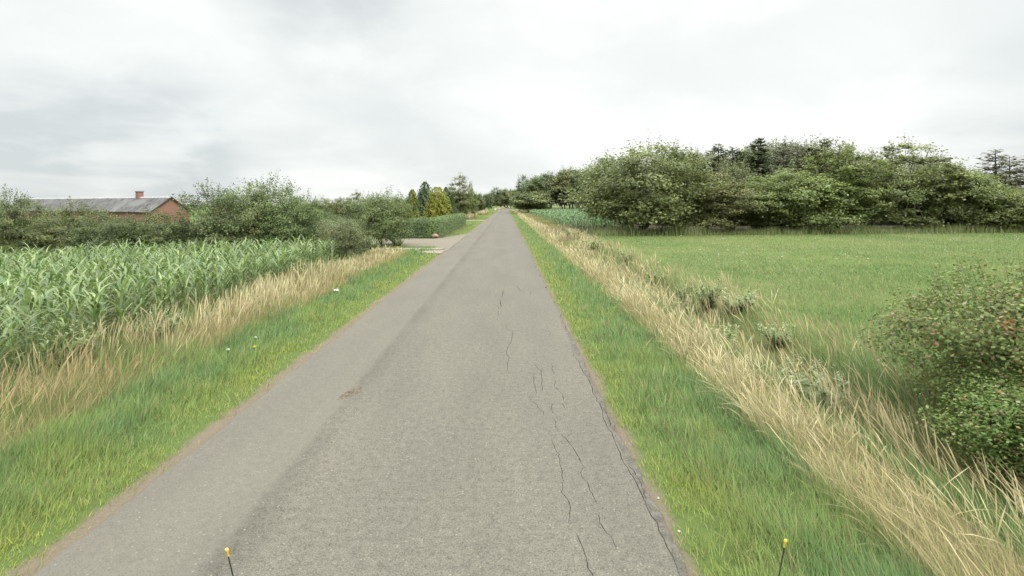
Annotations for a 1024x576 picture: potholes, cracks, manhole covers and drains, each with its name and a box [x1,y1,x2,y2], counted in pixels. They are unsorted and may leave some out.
crack [529,365,617,575]
crack [575,357,680,576]
